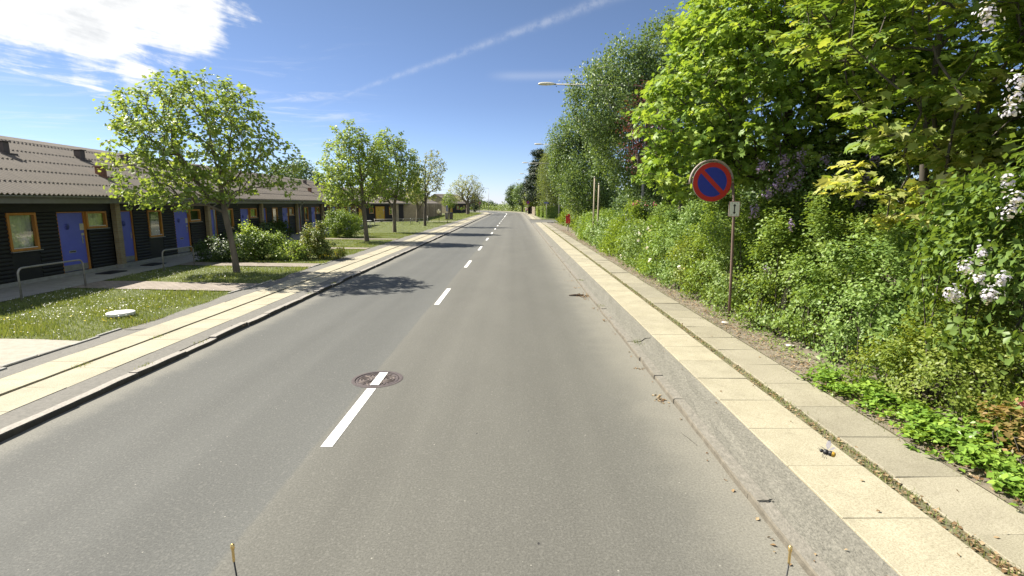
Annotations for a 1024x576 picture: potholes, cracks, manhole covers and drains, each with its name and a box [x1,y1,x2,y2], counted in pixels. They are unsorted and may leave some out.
manhole cover [351,371,403,388]
